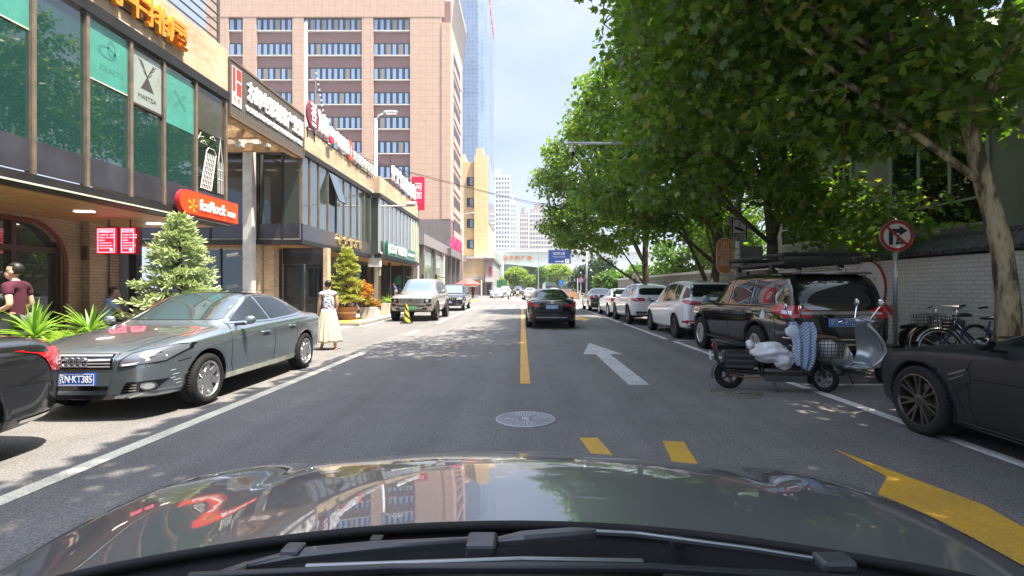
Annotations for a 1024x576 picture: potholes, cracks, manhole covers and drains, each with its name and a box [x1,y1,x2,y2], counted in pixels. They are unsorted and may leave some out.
manhole cover [709,387,764,399]
manhole cover [496,411,555,428]
